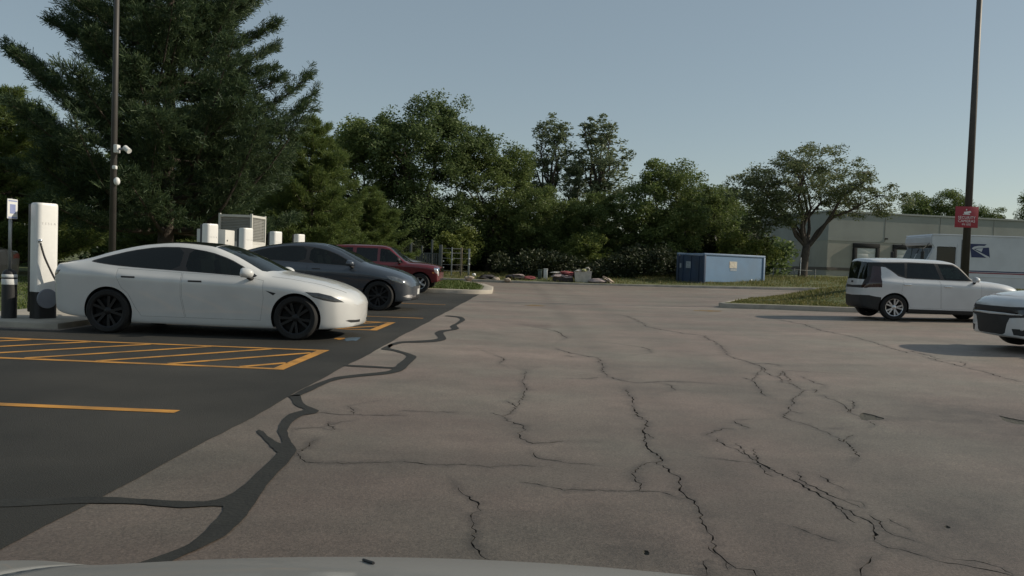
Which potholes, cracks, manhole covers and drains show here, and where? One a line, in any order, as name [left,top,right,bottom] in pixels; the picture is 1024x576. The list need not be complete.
pothole [1000,416,1024,425]
crack [629,317,875,457]
crack [706,419,1012,576]
crack [788,321,1020,382]
pothole [859,413,884,421]
crack [296,331,757,576]
